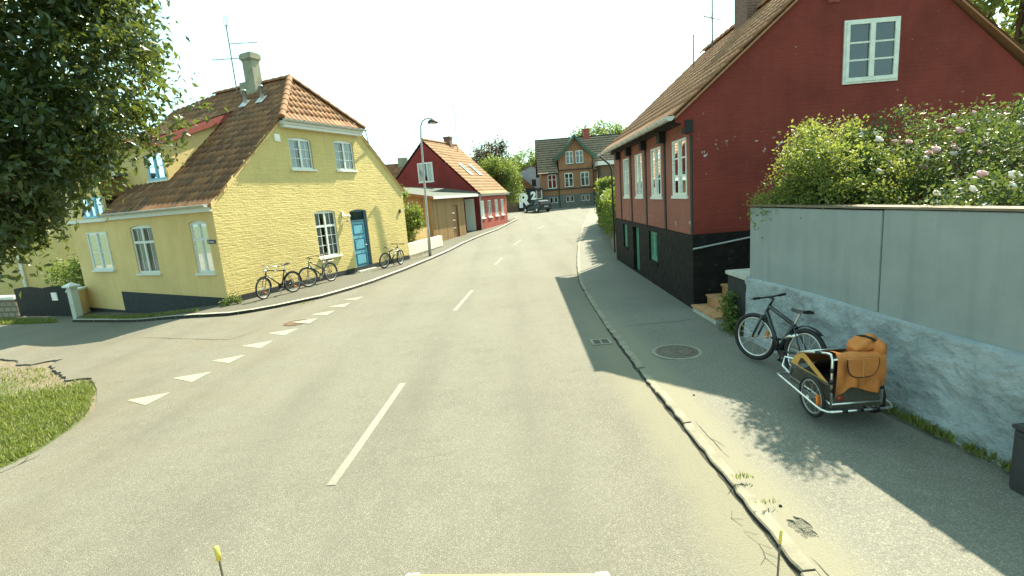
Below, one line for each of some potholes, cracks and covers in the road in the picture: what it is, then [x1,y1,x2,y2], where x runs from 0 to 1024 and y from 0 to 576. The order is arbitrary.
crack [731,514,778,567]
pothole [786,516,819,539]
manhole cover [652,344,703,360]
